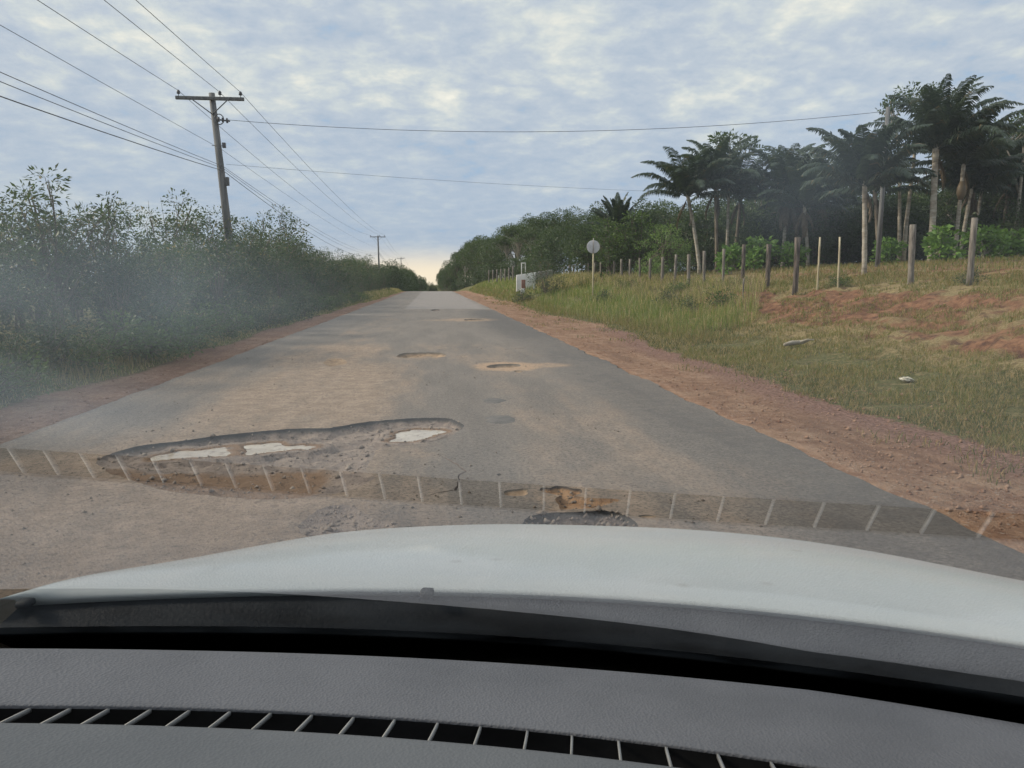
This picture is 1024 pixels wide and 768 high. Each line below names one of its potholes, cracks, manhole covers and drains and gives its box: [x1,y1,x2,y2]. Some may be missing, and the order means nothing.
pothole [96,418,464,500]
pothole [540,486,619,510]
crack [425,456,467,496]
